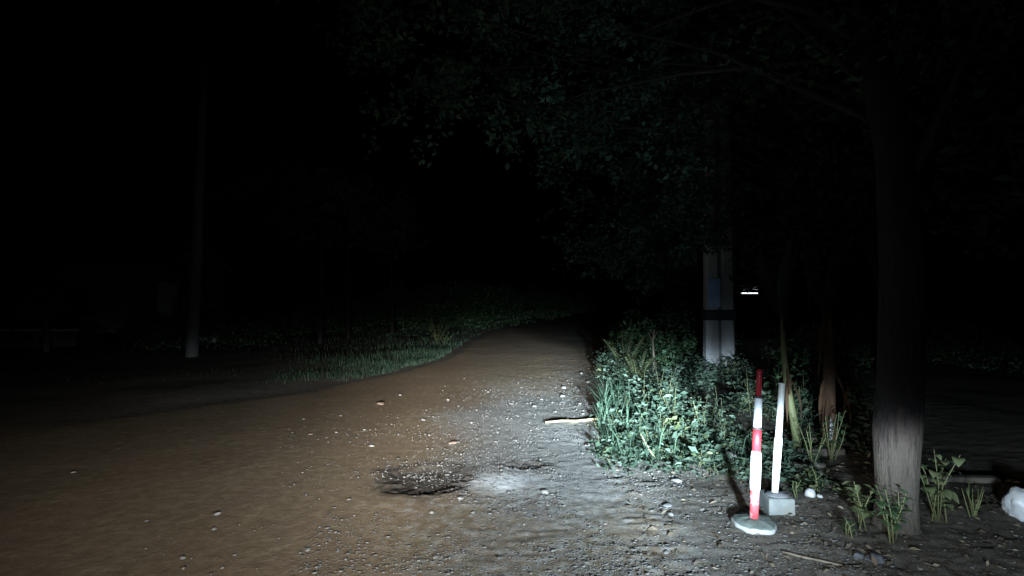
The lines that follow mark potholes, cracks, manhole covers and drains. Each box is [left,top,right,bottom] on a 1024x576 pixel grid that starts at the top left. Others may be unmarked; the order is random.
pothole [494,461,555,471]
pothole [369,463,489,501]
